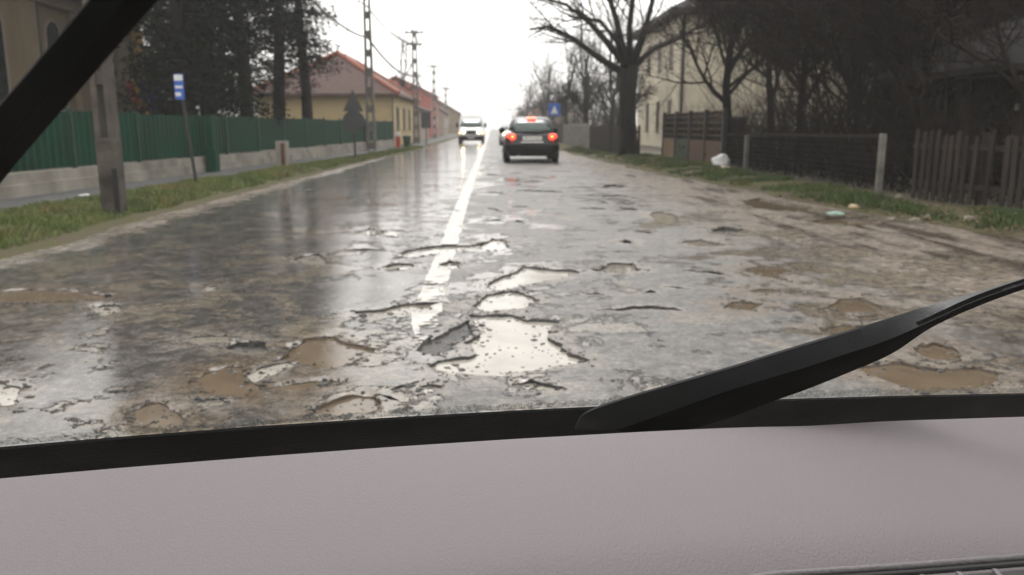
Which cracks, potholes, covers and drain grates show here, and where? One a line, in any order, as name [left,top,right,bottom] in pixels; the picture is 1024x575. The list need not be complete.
pothole [596,262,650,274]
pothole [743,198,814,211]
pothole [720,297,776,311]
crack [585,269,732,311]
pothole [650,212,679,224]
pothole [392,244,475,259]
pothole [458,288,550,311]
pothole [810,294,899,315]
pothole [471,238,513,252]
pothole [852,359,1014,395]
pothole [181,362,282,402]
